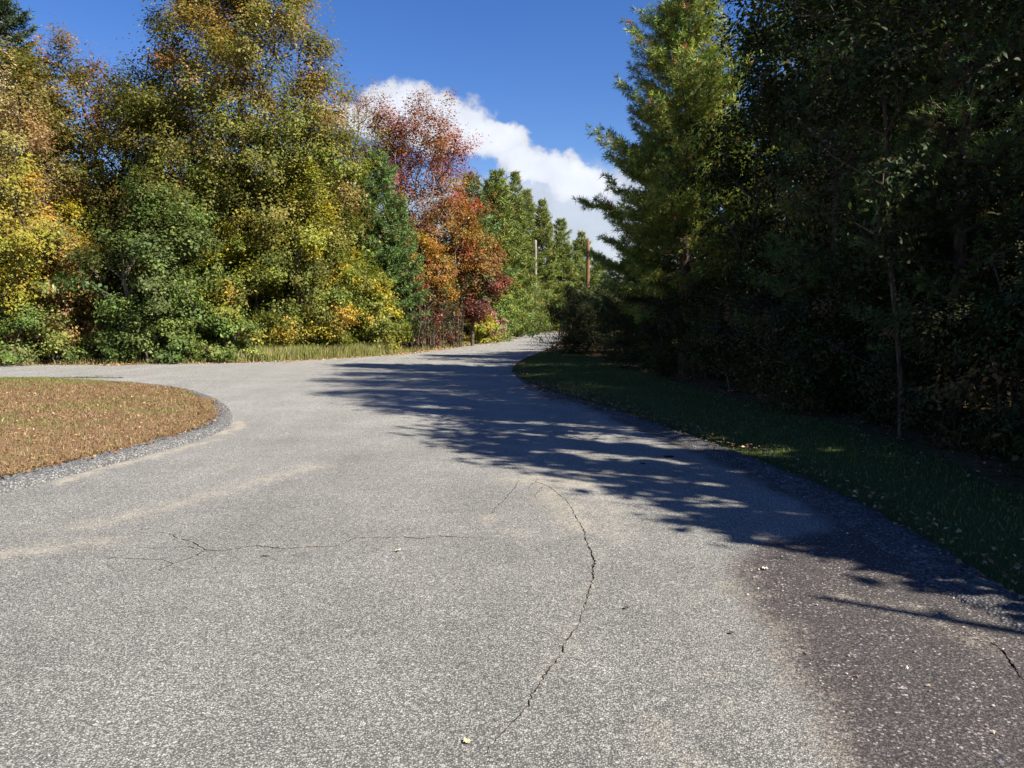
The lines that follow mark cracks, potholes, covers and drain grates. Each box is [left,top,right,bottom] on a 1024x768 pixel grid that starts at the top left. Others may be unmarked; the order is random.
crack [487,479,596,754]
crack [91,532,467,570]
crack [985,636,1024,680]
